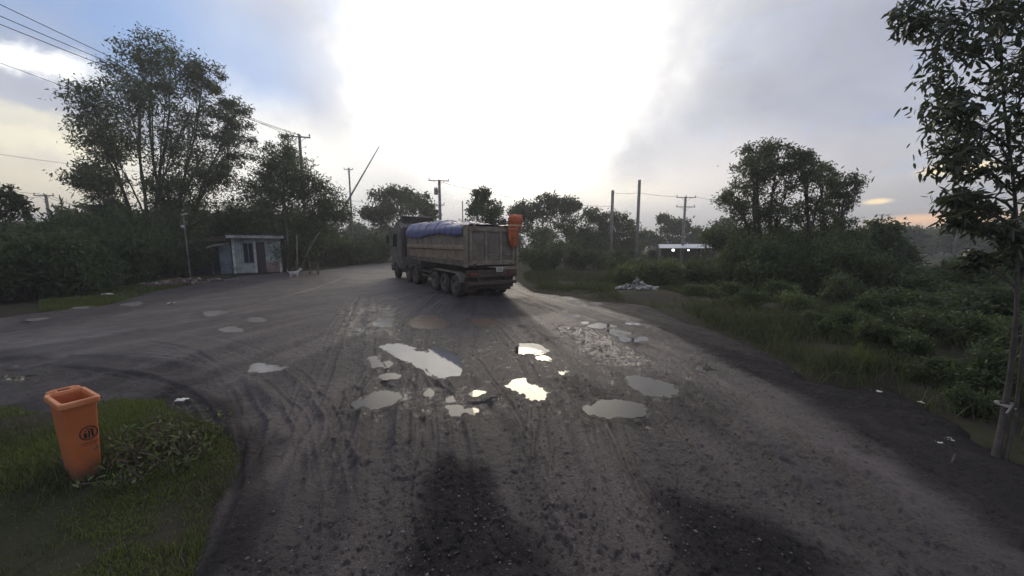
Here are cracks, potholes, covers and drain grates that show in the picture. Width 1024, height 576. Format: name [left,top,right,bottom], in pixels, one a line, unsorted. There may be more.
pothole [500,375,557,405]
pothole [511,342,554,356]
pothole [376,342,468,381]
pothole [527,353,559,363]
pothole [240,361,293,375]
pothole [584,322,610,330]
pothole [576,396,657,423]
pothole [437,403,484,421]
pothole [618,373,687,400]
pothole [363,359,398,371]
pothole [602,328,637,337]
